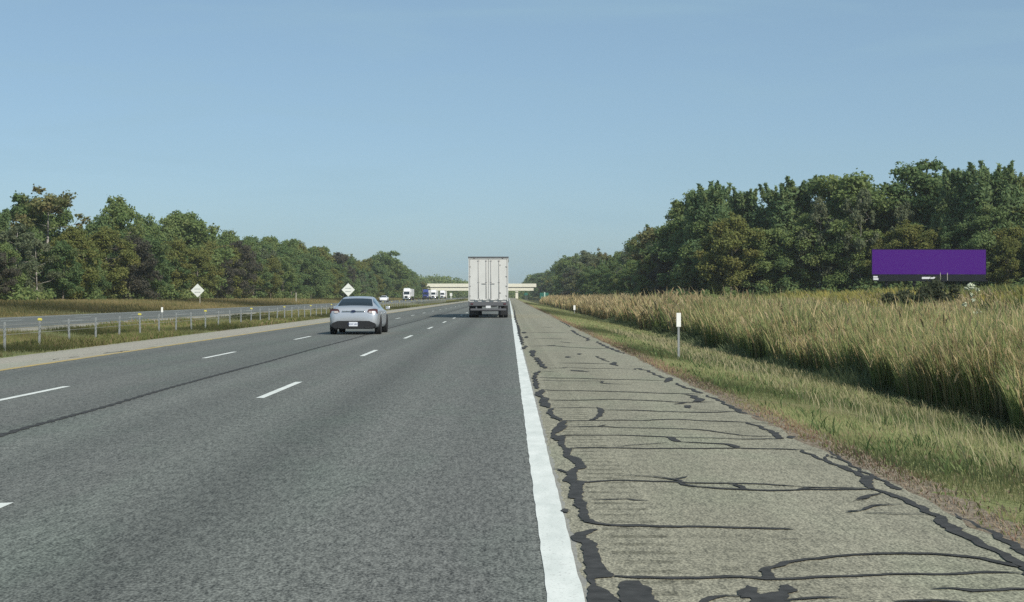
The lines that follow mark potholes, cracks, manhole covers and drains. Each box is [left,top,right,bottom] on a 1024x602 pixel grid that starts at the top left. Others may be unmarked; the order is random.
crack [576,422,796,439]
crack [824,450,902,490]
crack [541,332,705,408]
